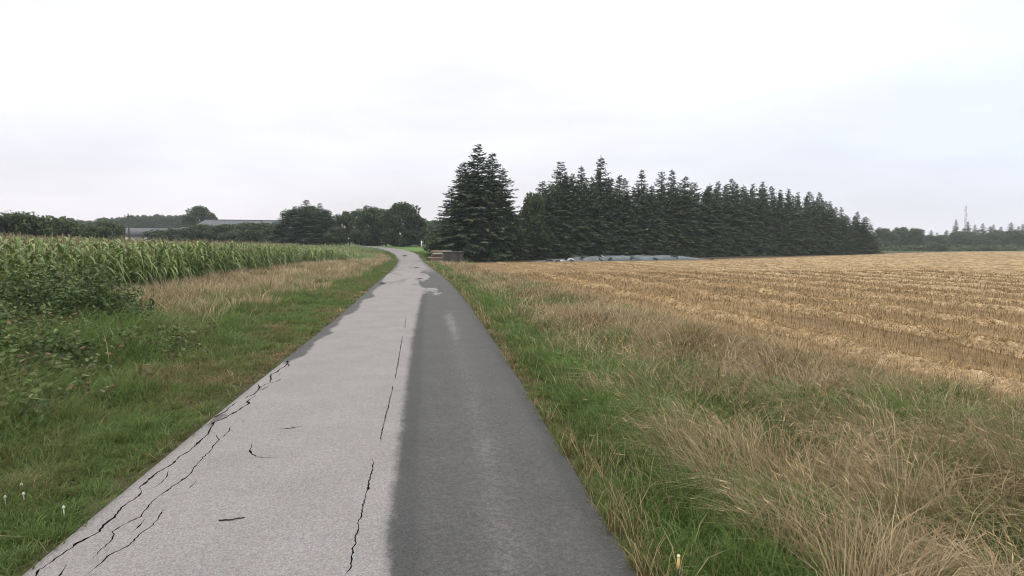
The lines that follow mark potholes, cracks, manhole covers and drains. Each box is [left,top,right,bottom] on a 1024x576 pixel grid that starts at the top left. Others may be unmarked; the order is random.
crack [346,459,374,573]
crack [35,361,290,576]
crack [380,320,406,440]
